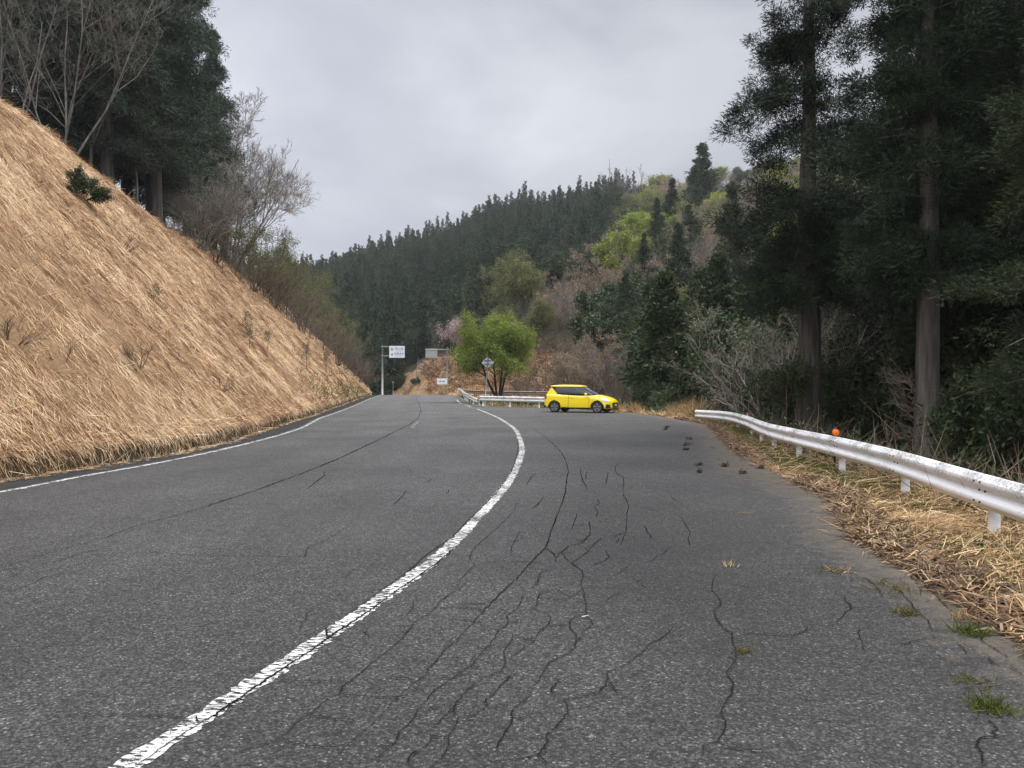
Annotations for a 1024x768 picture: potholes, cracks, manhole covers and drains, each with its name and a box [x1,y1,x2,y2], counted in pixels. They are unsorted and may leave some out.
crack [57,462,691,766]
crack [695,578,808,765]
crack [826,597,865,650]
crack [862,570,952,644]
crack [975,717,998,766]
